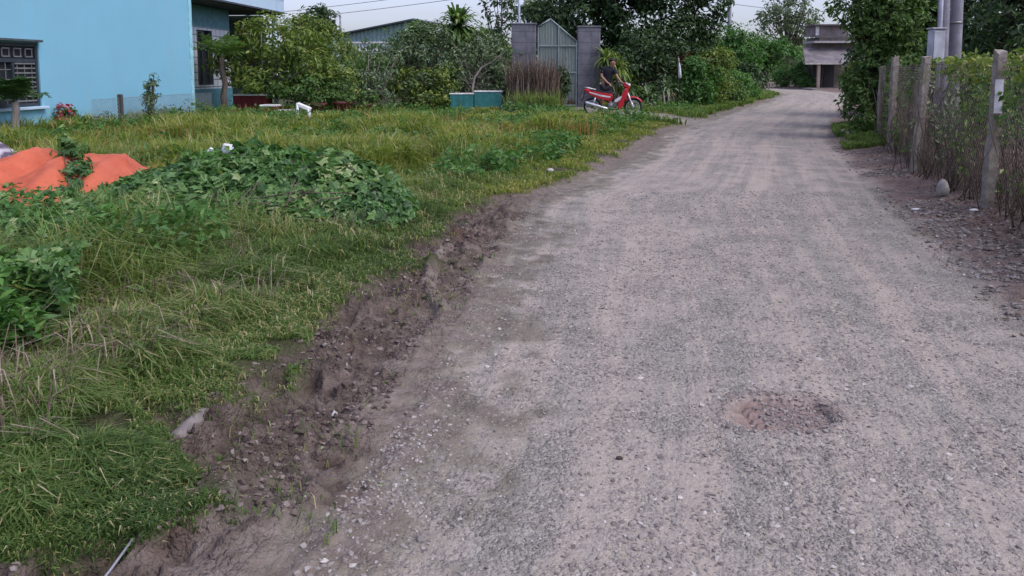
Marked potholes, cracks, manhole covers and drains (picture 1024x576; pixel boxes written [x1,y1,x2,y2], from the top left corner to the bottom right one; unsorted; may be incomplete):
pothole [724,394,841,434]
